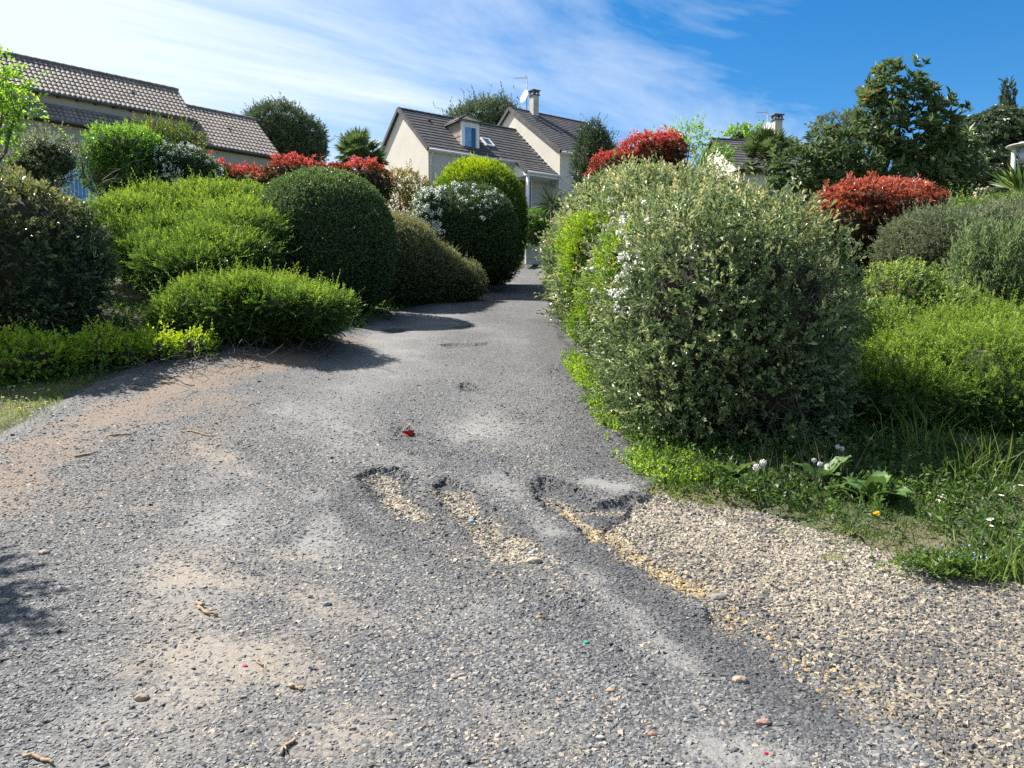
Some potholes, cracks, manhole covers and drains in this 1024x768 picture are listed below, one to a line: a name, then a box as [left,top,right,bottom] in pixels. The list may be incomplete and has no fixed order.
pothole [526,476,654,582]
pothole [354,466,442,534]
pothole [454,382,478,393]
pothole [425,475,543,565]
